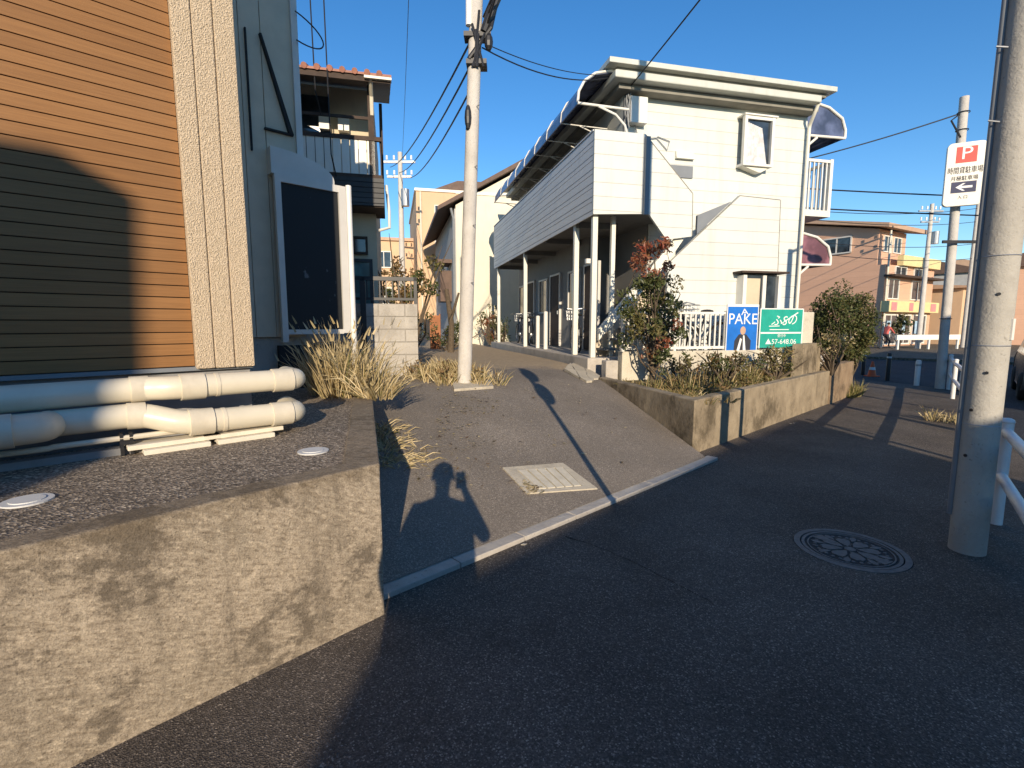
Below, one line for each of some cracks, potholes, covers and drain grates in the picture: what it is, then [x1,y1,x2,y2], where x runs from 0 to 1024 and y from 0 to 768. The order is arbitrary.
drain grate [503,463,597,494]
manhole cover [794,528,913,574]
utility cover [0,493,55,509]
utility cover [297,447,329,455]
